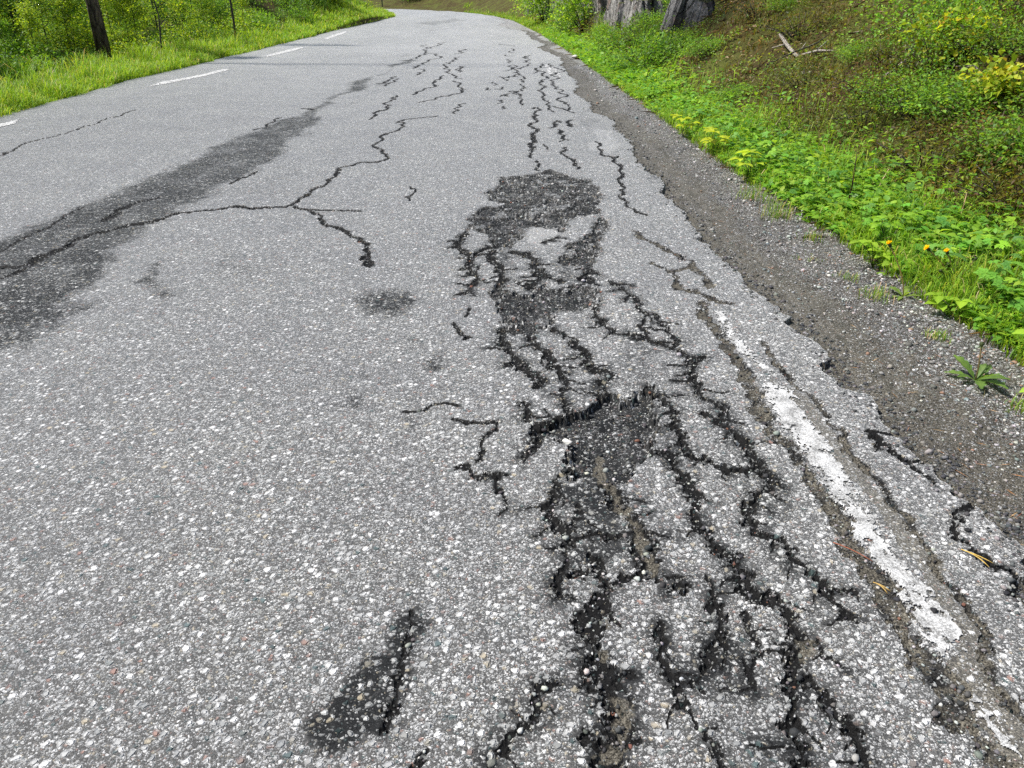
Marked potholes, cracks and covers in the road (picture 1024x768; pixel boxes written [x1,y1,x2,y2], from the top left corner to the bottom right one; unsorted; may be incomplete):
crack [0,42,467,279]
crack [403,44,1024,768]
crack [379,609,430,768]
pothole [528,391,662,487]
